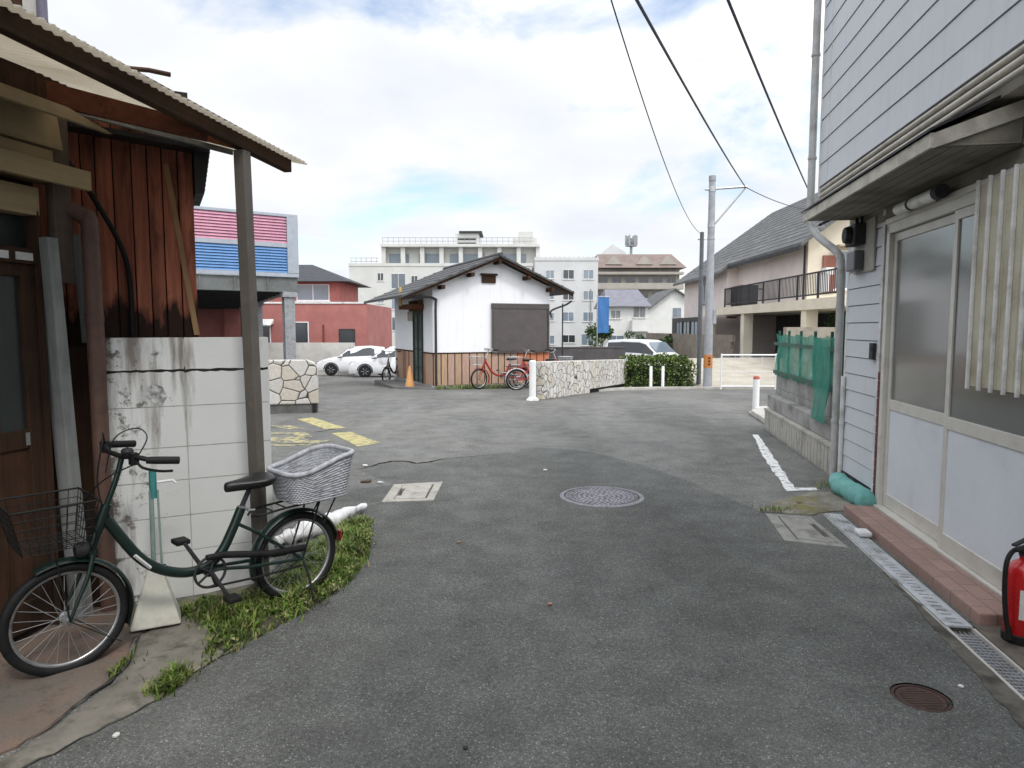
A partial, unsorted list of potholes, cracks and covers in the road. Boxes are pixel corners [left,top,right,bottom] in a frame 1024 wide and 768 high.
manhole cover [890,684,954,713]
crack [361,455,482,469]
manhole cover [560,486,644,507]
